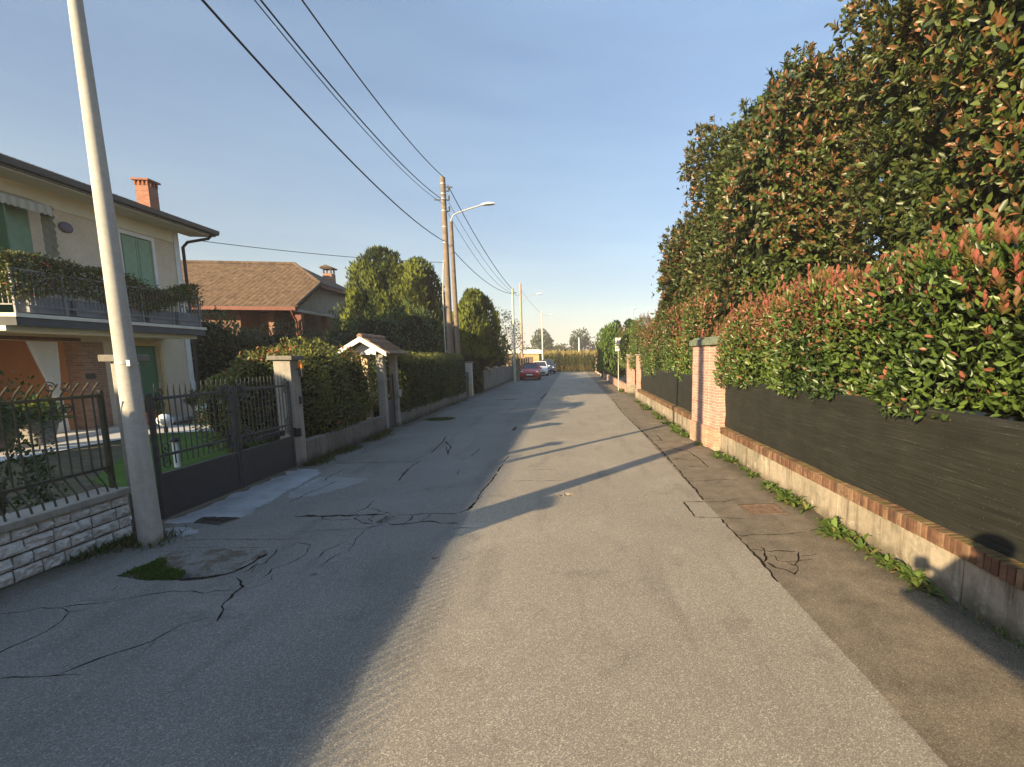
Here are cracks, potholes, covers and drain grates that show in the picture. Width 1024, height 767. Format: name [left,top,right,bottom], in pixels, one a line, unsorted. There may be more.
crack [398,438,480,481]
crack [0,471,462,679]
manhole cover [739,503,788,514]
crack [683,498,816,575]
